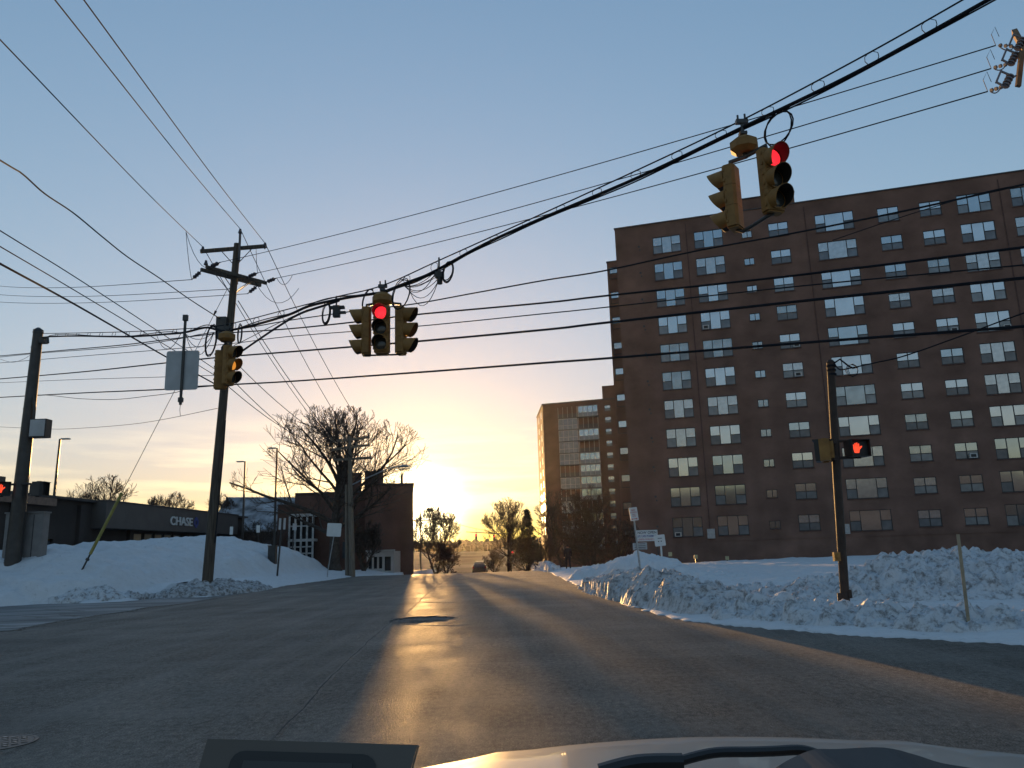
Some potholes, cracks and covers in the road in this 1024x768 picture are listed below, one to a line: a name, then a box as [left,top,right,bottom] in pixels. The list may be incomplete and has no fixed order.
manhole cover [0,734,39,750]
